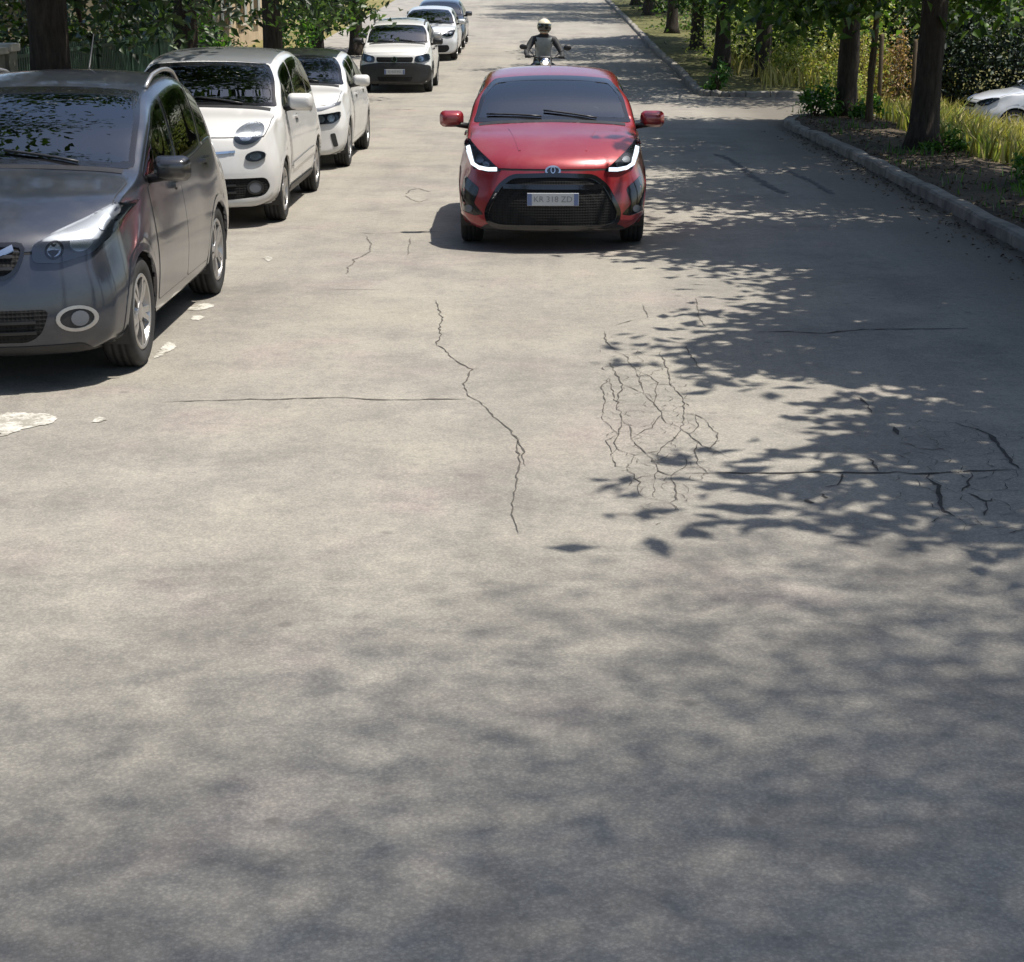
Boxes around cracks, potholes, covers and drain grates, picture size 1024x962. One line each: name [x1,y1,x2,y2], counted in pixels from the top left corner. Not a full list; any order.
crack [166,302,526,531]
crack [336,231,433,290]
crack [598,298,1023,533]
